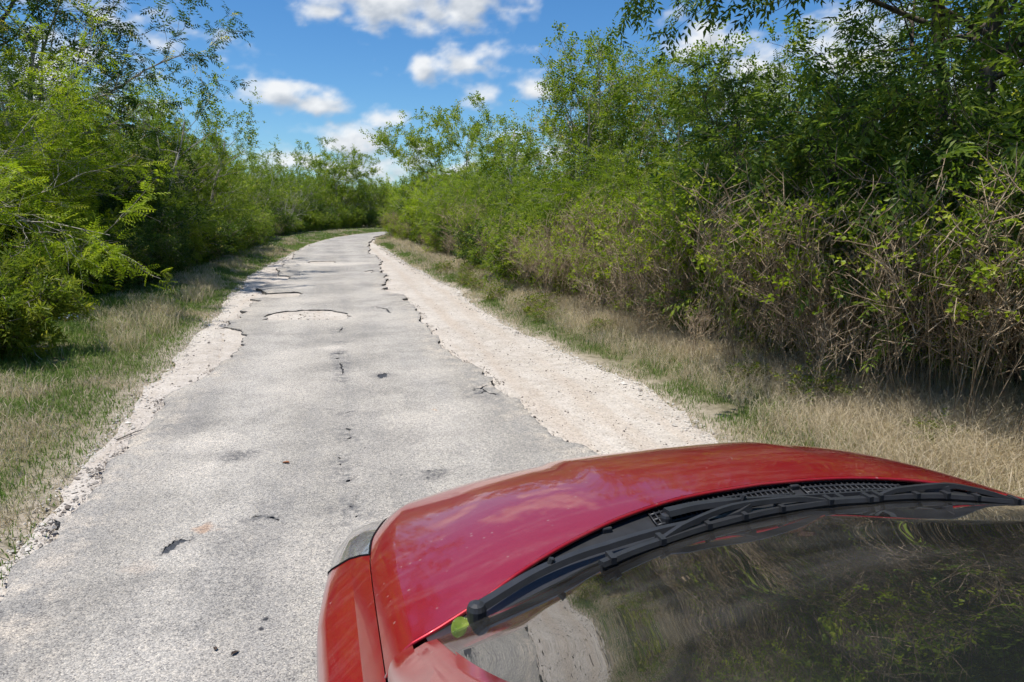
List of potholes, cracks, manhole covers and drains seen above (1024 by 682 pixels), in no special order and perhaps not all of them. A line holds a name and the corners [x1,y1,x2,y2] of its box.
pothole [162,539,190,554]
crack [336,327,358,517]
pothole [263,310,351,320]
